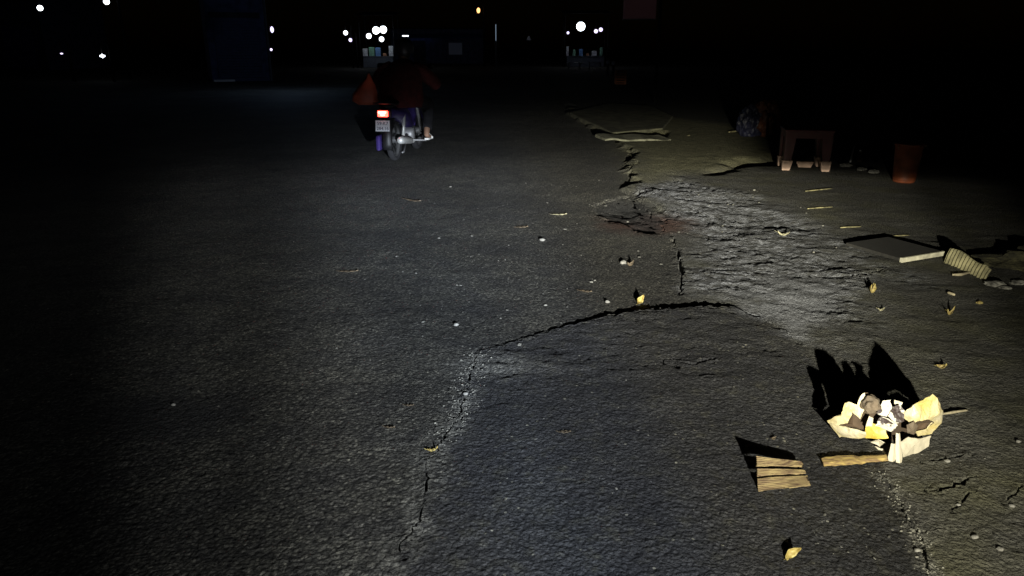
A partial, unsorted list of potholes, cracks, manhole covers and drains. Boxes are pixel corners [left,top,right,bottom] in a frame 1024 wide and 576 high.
crack [871,451,1024,576]
crack [390,145,802,561]
